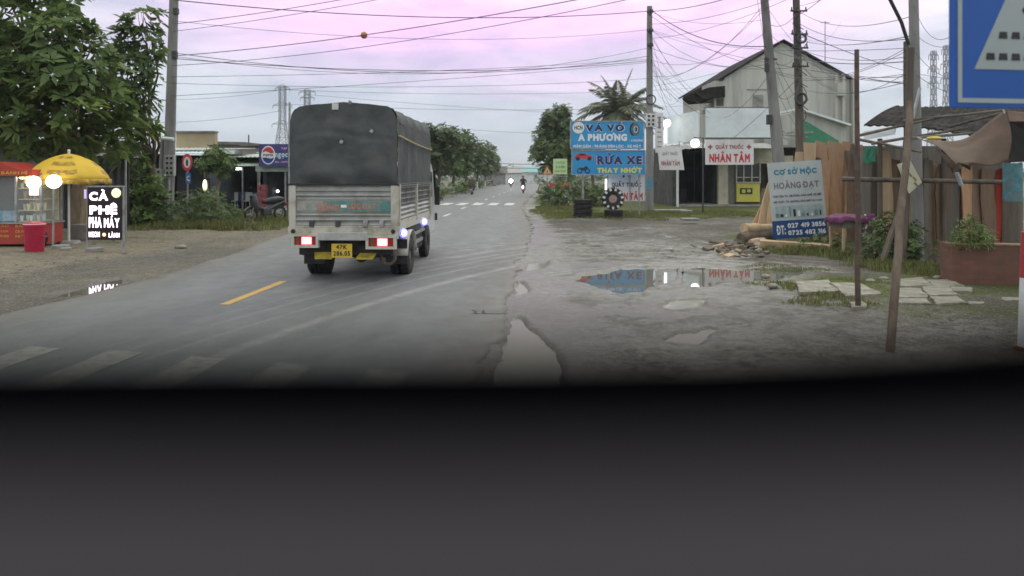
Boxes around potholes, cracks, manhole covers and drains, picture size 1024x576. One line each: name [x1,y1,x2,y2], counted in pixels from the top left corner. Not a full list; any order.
pothole [507,319,540,340]
pothole [514,283,528,295]
